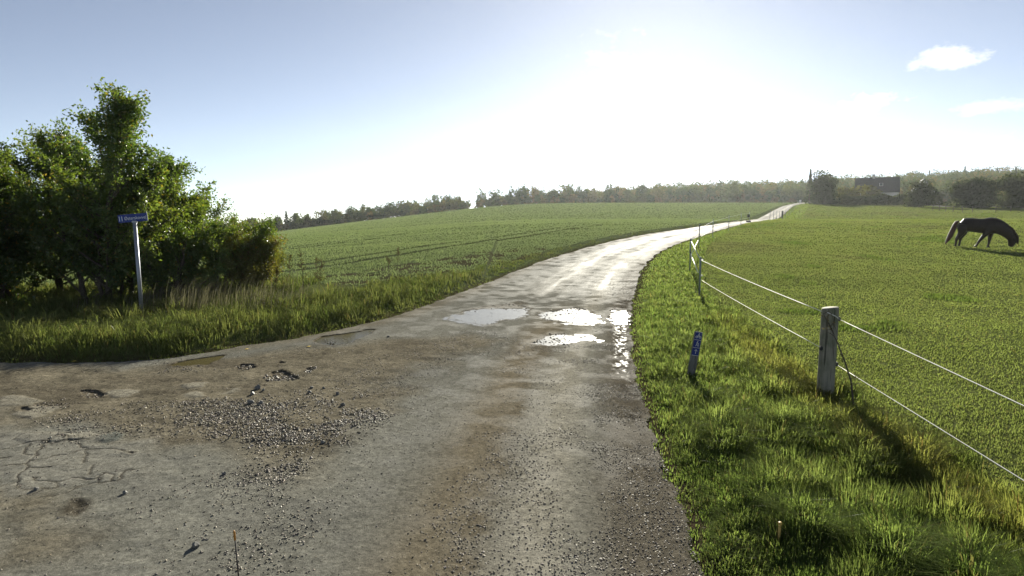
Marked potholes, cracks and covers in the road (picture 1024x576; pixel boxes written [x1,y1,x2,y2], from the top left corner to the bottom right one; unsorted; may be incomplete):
pothole [262,369,302,382]
crack [6,432,131,497]
pothole [311,328,377,347]
pothole [75,388,110,399]
pothole [232,363,259,372]
pothole [164,354,229,367]
